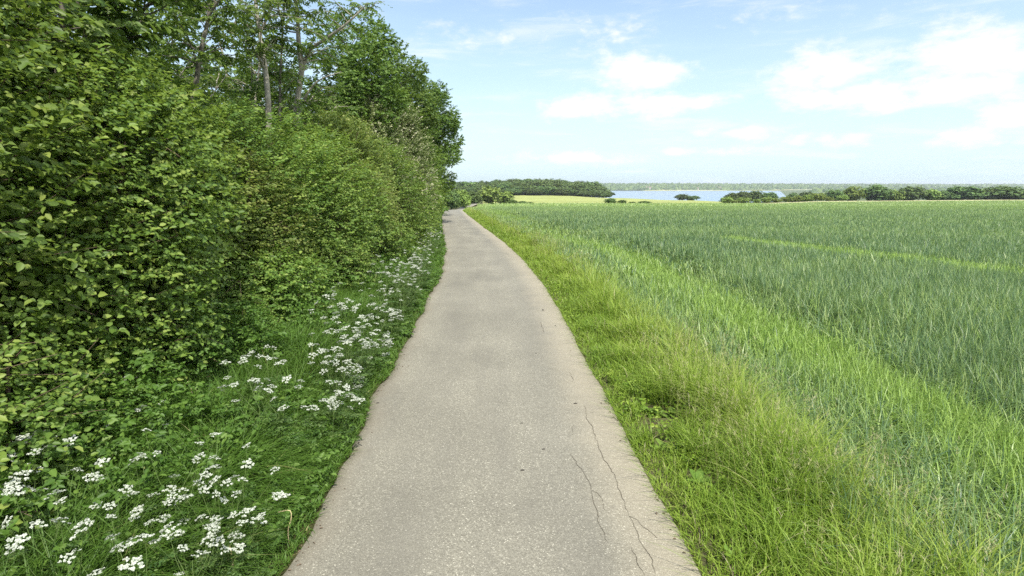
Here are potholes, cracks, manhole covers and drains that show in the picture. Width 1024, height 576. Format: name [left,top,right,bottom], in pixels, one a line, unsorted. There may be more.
crack [573,408,657,571]
